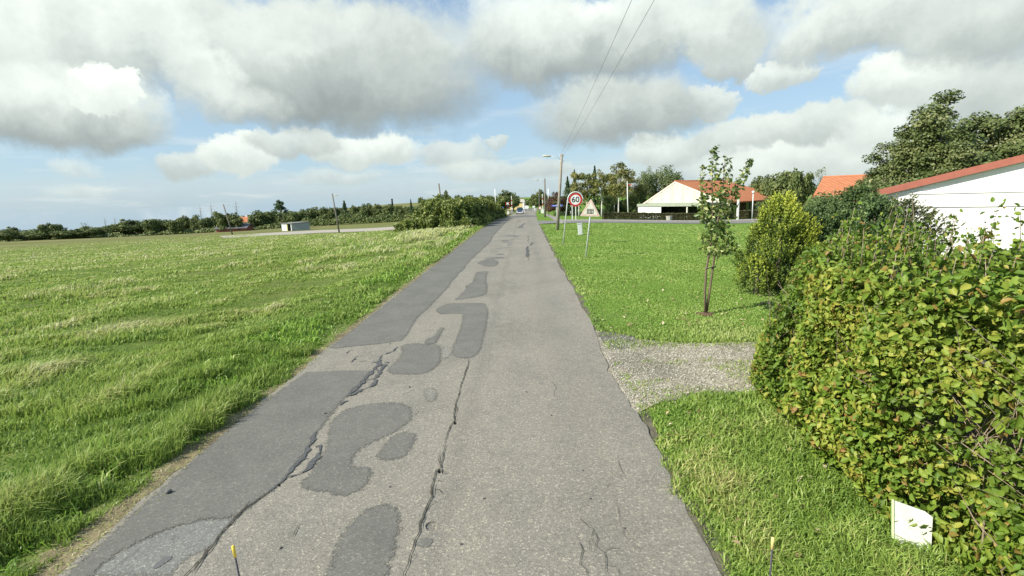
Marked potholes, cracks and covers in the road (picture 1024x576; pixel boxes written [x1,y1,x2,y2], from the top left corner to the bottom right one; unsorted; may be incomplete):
crack [170,492,268,576]
crack [579,461,632,576]
crack [403,360,469,576]
